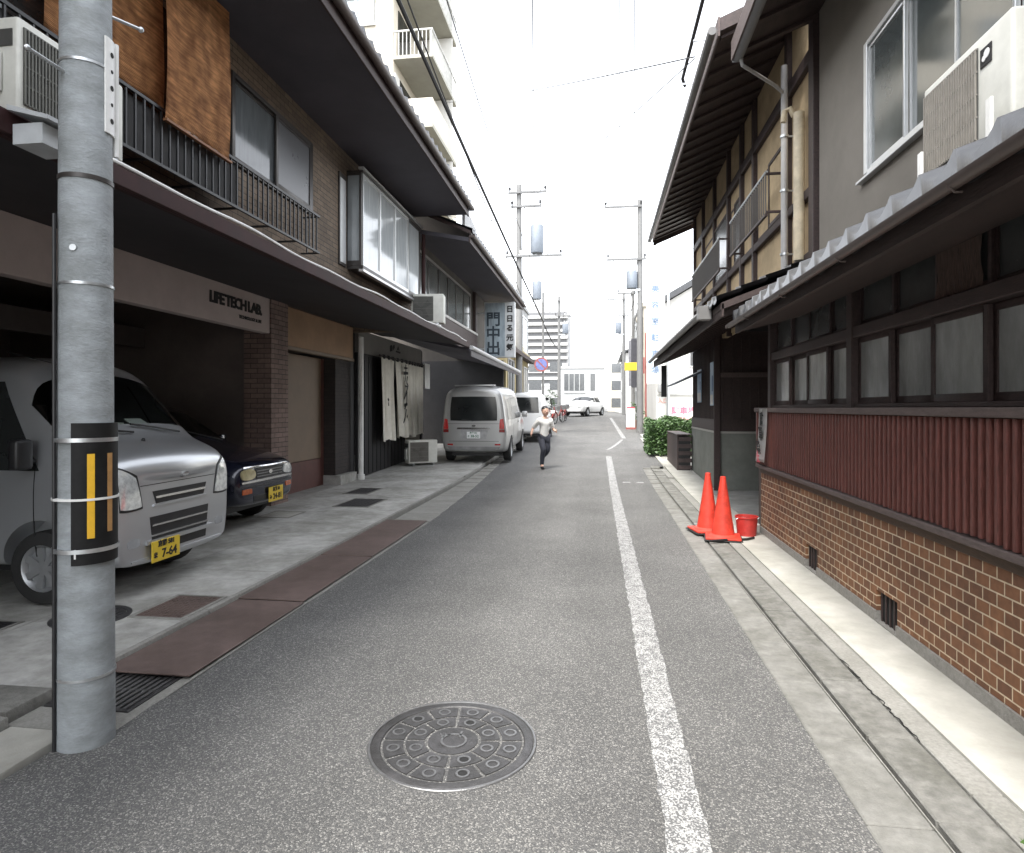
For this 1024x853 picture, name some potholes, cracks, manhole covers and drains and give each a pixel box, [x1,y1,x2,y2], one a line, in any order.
drain grate [332,498,387,508]
utility cover [47,605,132,628]
drain grate [44,672,183,713]
crack [840,659,920,742]
manhole cover [367,701,537,792]
